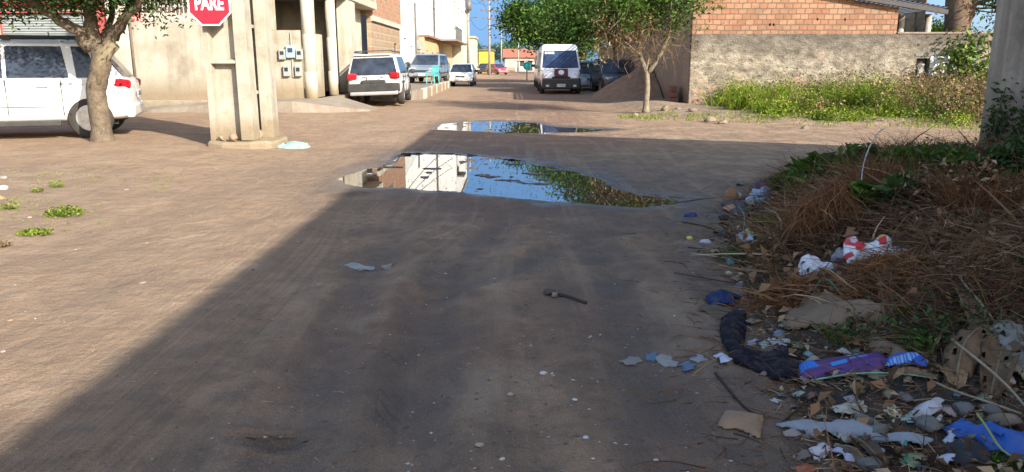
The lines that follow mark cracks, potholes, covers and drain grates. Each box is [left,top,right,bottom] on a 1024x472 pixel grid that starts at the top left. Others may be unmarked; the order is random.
pothole [412,119,640,136]
pothole [205,426,346,463]
pothole [294,148,728,220]
